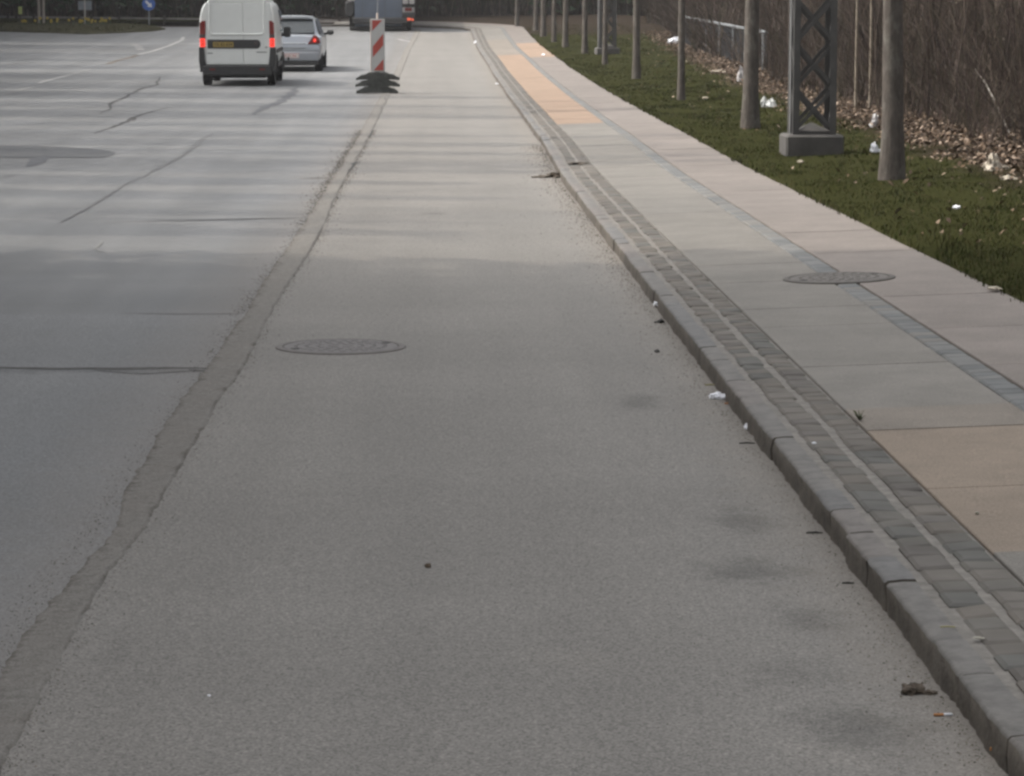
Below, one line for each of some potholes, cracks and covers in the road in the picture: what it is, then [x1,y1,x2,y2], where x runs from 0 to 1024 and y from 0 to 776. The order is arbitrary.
manhole cover [275,338,406,355]
manhole cover [783,272,896,286]
crack [14,76,296,223]
